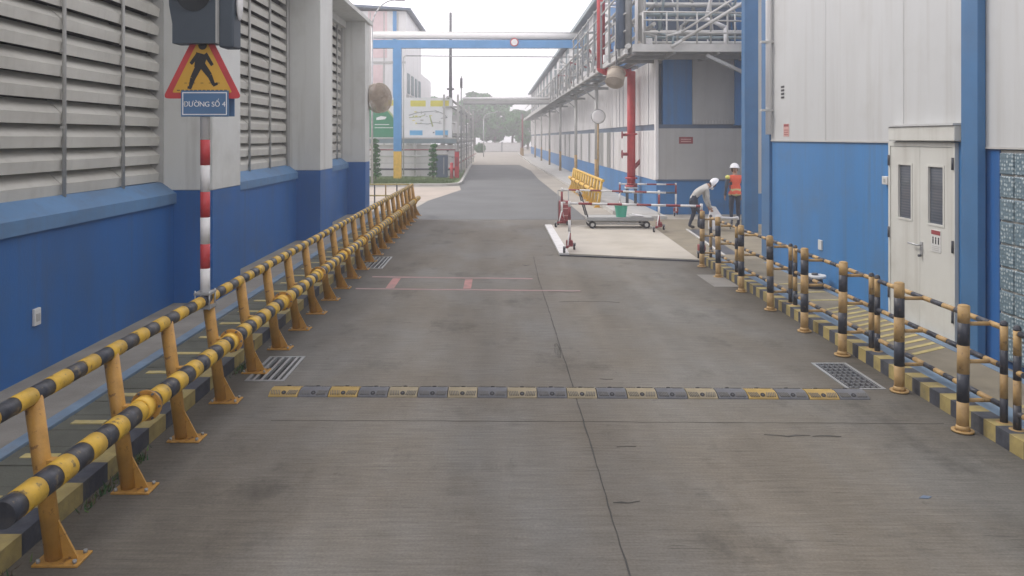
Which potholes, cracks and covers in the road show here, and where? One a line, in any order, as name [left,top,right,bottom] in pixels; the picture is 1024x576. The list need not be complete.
drain grate [811,363,887,390]
drain grate [365,257,392,269]
drain grate [244,356,306,381]
